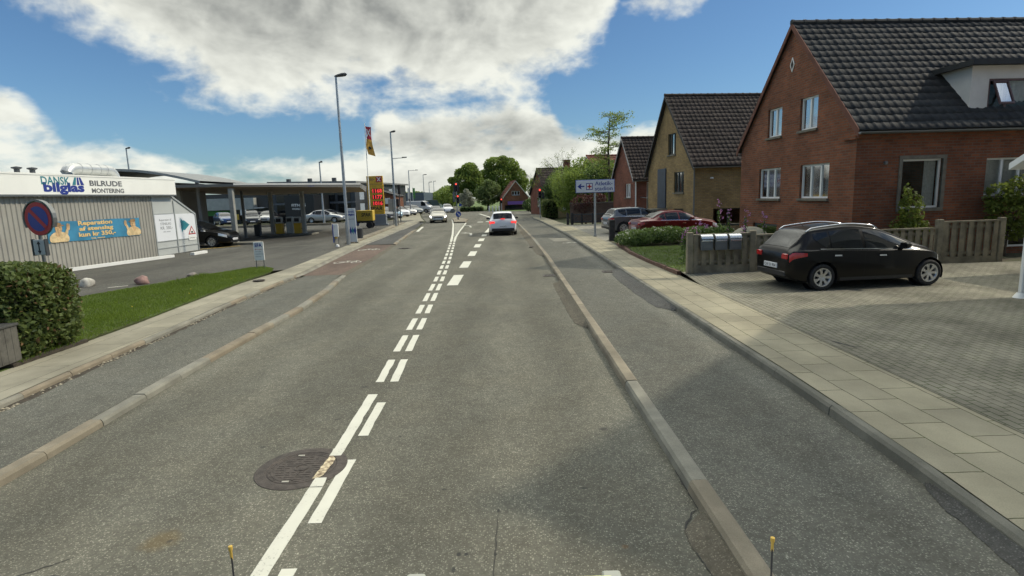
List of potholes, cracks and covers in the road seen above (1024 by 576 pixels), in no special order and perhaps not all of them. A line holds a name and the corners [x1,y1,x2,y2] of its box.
manhole cover [254,448,348,491]
